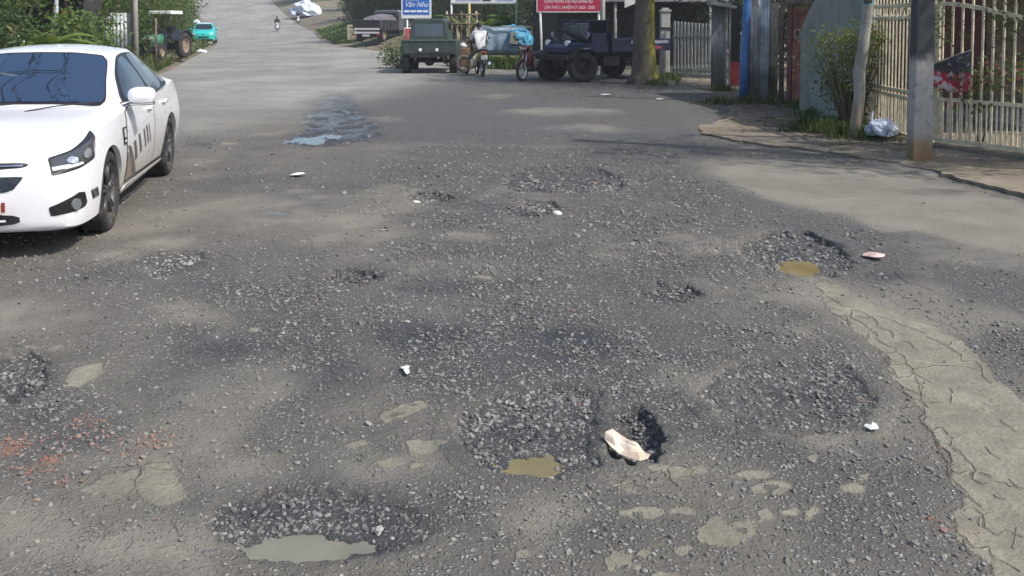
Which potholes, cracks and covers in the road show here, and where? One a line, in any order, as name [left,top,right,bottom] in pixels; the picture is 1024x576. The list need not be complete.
pothole [387,189,475,205]
pothole [477,164,639,197]
pothole [721,226,875,283]
pothole [430,376,618,489]
pothole [0,344,67,414]
pothole [171,474,468,576]
pothole [484,196,581,221]
pothole [297,264,402,292]
pothole [588,397,686,476]
pothole [616,276,725,310]
crack [815,288,1024,572]
pothole [126,246,226,285]
